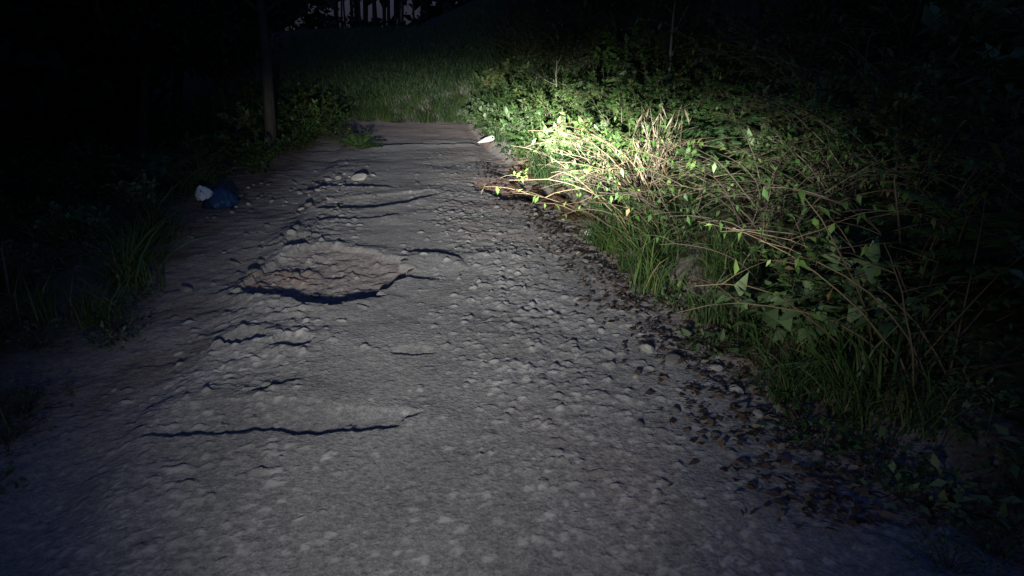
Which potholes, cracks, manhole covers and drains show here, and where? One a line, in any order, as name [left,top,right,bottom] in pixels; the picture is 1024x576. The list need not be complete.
pothole [228,242,413,305]
